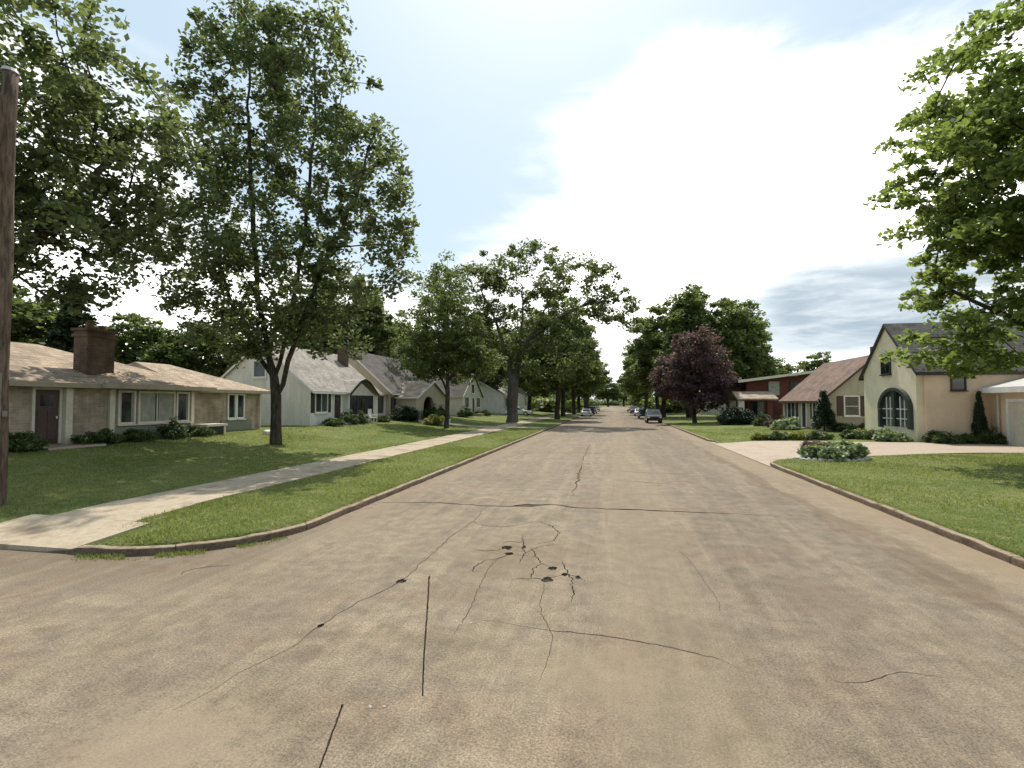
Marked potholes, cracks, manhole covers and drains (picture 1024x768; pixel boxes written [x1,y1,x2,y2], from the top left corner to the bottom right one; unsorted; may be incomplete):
crack [836,672,943,683]
crack [174,444,748,710]
